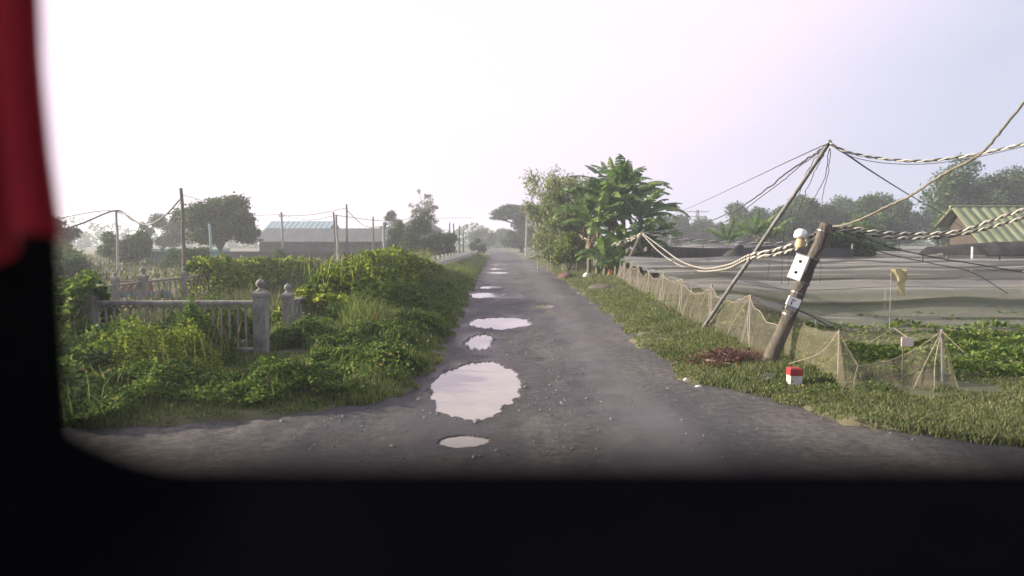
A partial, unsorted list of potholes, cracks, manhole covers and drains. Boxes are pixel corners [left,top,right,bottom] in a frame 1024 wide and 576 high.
pothole [429,361,522,420]
pothole [465,334,493,350]
pothole [468,317,533,330]
pothole [437,434,491,448]
